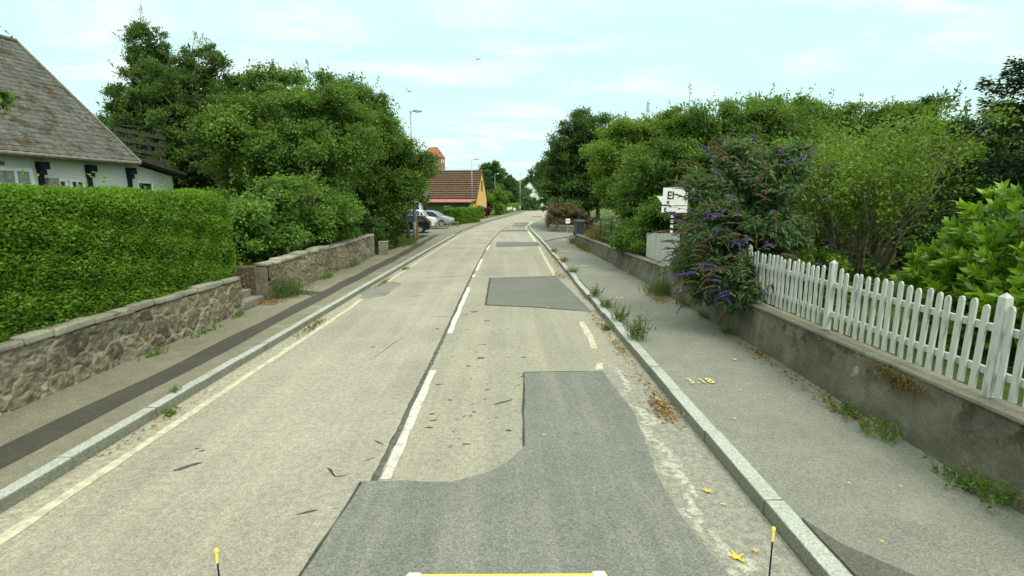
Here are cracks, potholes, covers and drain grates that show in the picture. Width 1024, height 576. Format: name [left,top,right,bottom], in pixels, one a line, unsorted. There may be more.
crack [172,462,201,471]
